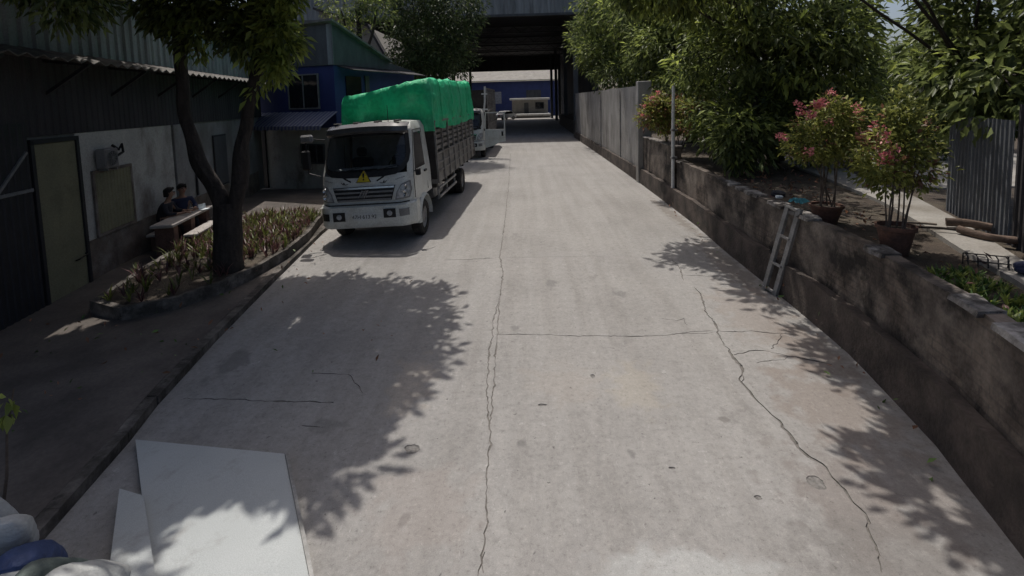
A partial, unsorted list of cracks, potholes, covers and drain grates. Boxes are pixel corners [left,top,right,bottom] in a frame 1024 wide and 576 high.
crack [452,154,882,576]
